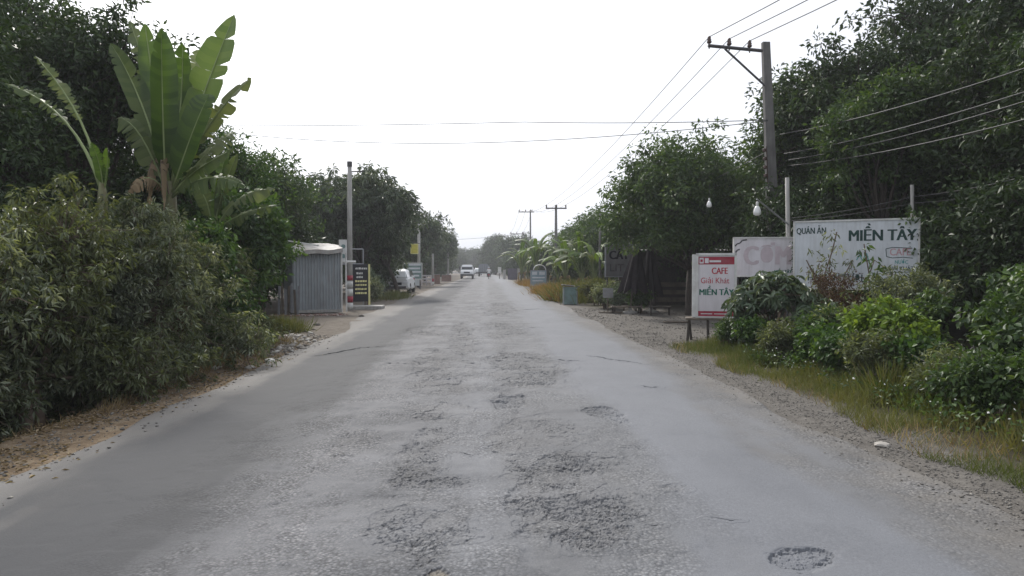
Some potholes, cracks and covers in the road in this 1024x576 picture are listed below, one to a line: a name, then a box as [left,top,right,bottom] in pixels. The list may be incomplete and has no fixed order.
crack [309,302,698,575]
pothole [483,393,535,411]
pothole [574,404,641,426]
